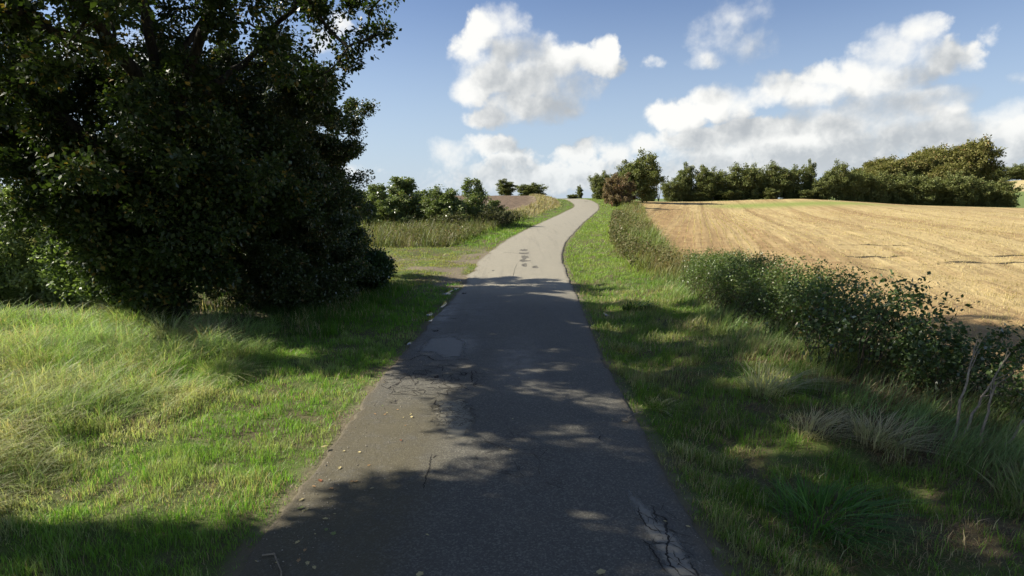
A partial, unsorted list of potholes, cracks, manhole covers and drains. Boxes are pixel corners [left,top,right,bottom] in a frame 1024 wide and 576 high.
crack [636,504,699,576]
crack [381,355,484,429]
